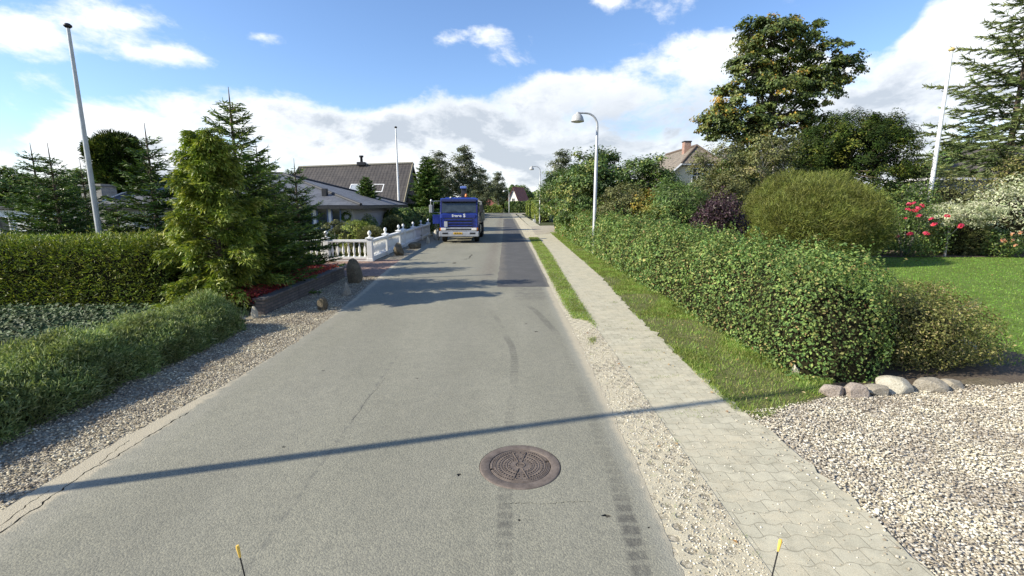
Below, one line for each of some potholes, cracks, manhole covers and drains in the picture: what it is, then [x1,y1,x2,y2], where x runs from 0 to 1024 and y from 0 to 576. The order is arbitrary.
manhole cover [479,445,561,490]
